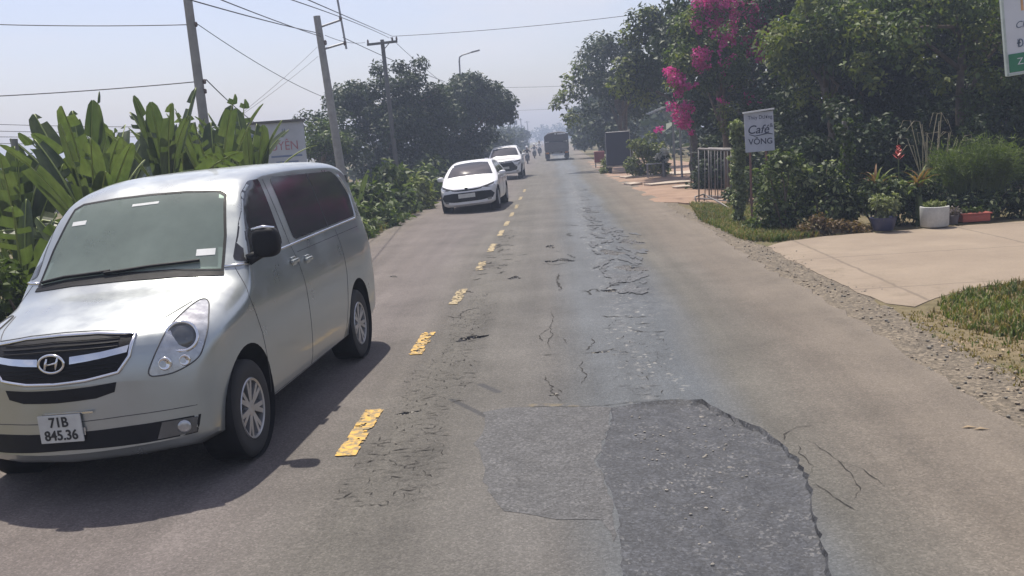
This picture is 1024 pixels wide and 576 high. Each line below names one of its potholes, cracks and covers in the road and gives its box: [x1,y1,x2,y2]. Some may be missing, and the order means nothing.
crack [783,425,885,509]
crack [530,315,673,407]
crack [335,293,491,506]
crack [543,190,649,295]
